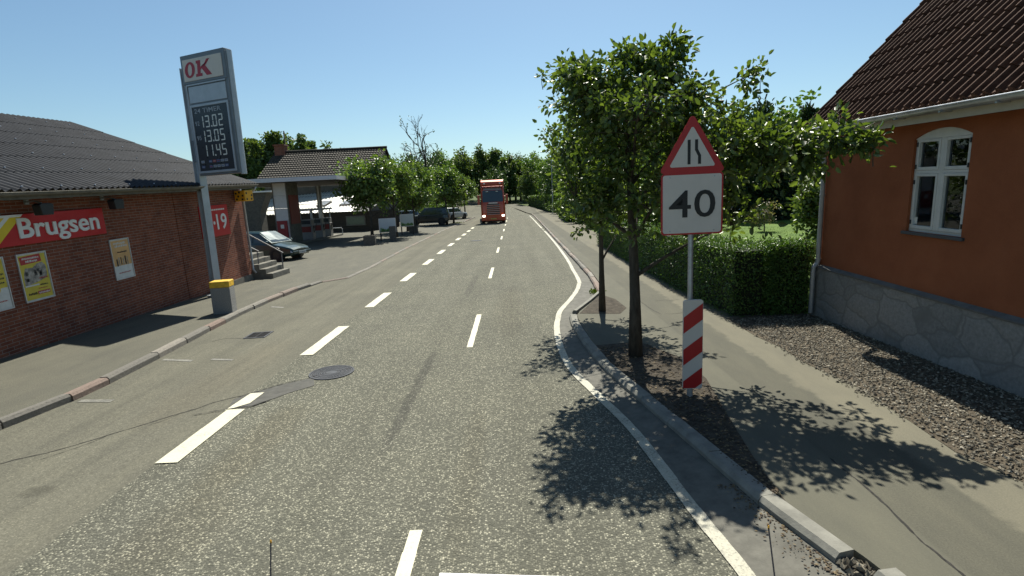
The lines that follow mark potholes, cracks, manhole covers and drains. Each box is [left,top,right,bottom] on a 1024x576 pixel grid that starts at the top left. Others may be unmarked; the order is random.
drain grate [243,331,274,339]
crack [829,457,966,576]
manhole cover [308,365,354,380]
